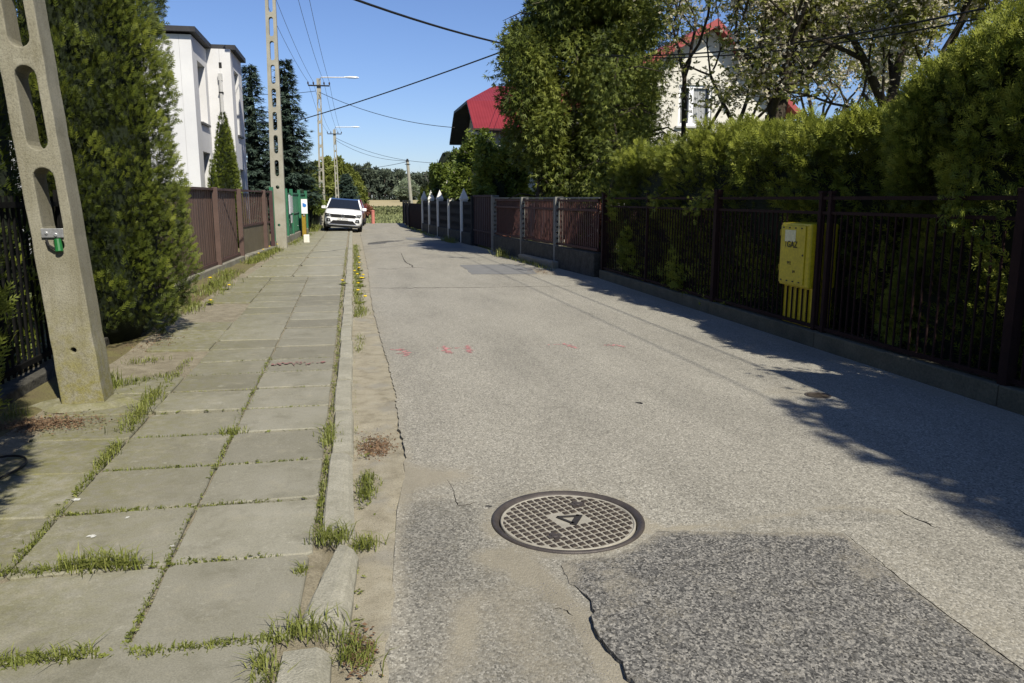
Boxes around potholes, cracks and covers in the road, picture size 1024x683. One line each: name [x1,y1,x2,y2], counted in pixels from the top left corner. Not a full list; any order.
manhole cover [491,491,645,554]
